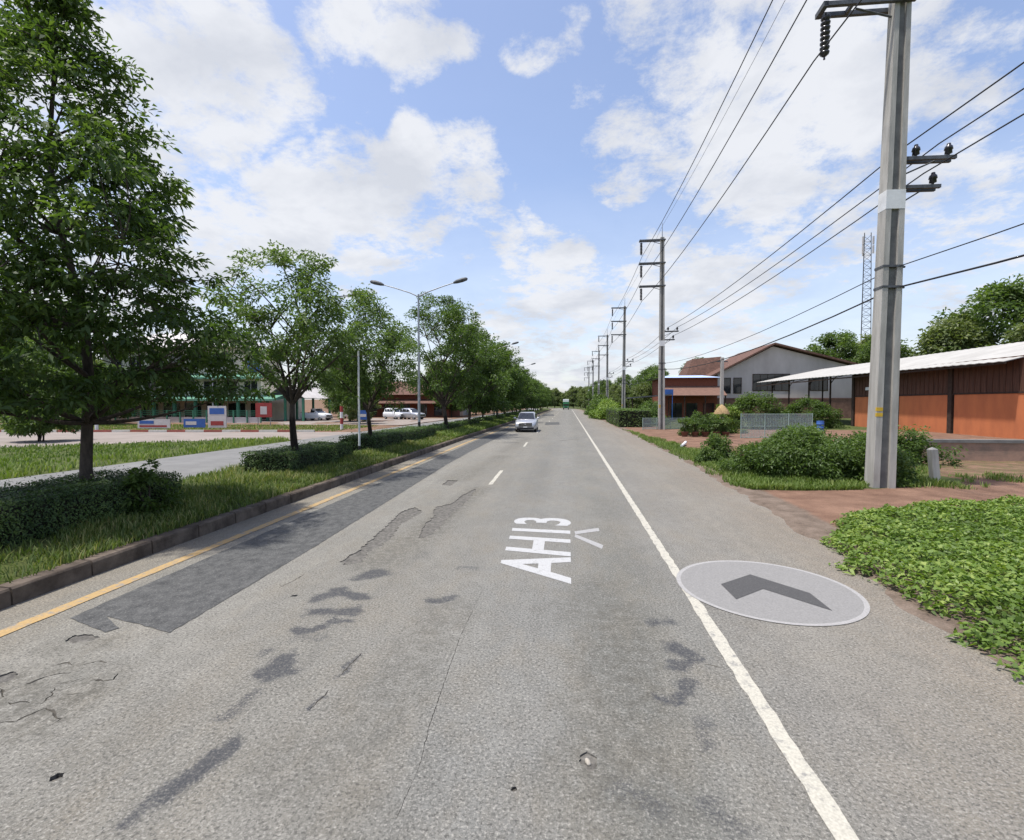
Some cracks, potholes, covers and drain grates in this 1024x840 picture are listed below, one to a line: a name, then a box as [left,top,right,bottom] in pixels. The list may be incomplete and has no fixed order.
pothole [340,507,422,565]
pothole [418,489,476,538]
crack [309,654,361,710]
crack [0,660,118,726]
pothole [65,634,100,643]
pothole [579,752,597,772]
